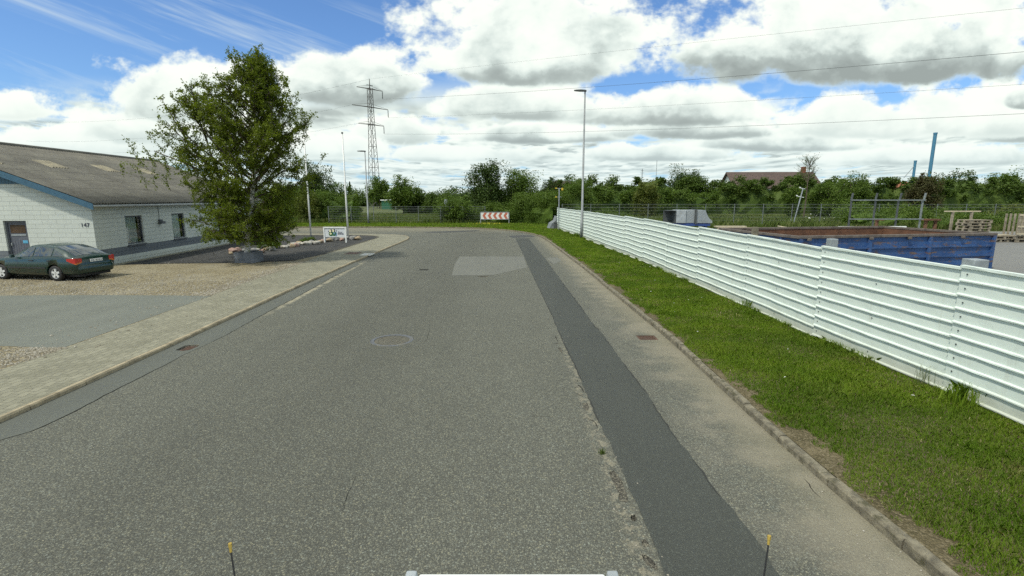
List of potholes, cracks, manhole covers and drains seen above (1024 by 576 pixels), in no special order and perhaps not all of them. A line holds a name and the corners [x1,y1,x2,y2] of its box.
manhole cover [370,334,414,346]
